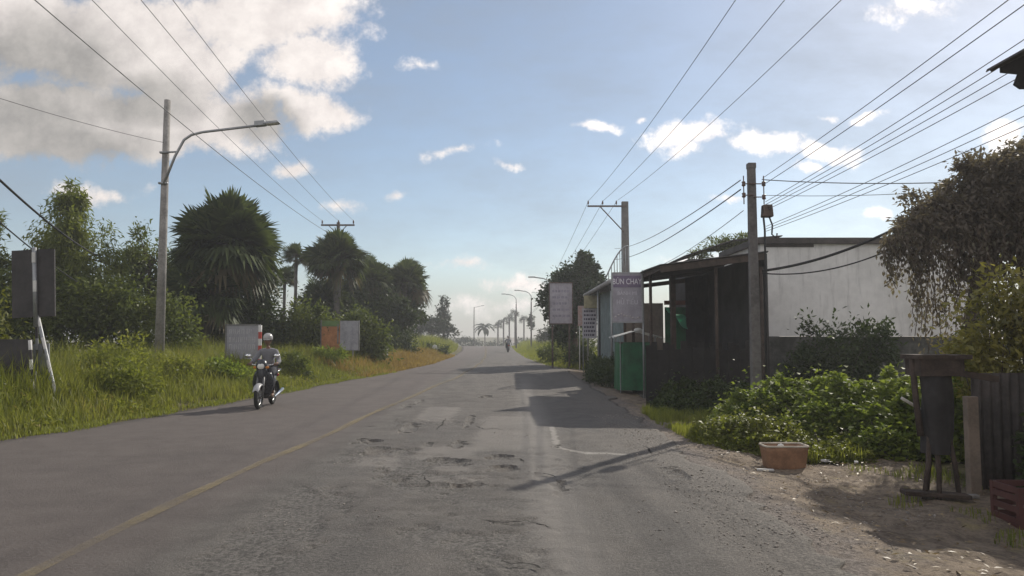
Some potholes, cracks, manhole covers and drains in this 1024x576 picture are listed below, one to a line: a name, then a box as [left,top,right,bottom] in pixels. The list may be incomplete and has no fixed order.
pothole [445,440,469,449]
pothole [442,481,488,490]
pothole [390,478,411,487]
pothole [426,457,474,467]
pothole [461,414,476,429]
pothole [397,421,421,434]
